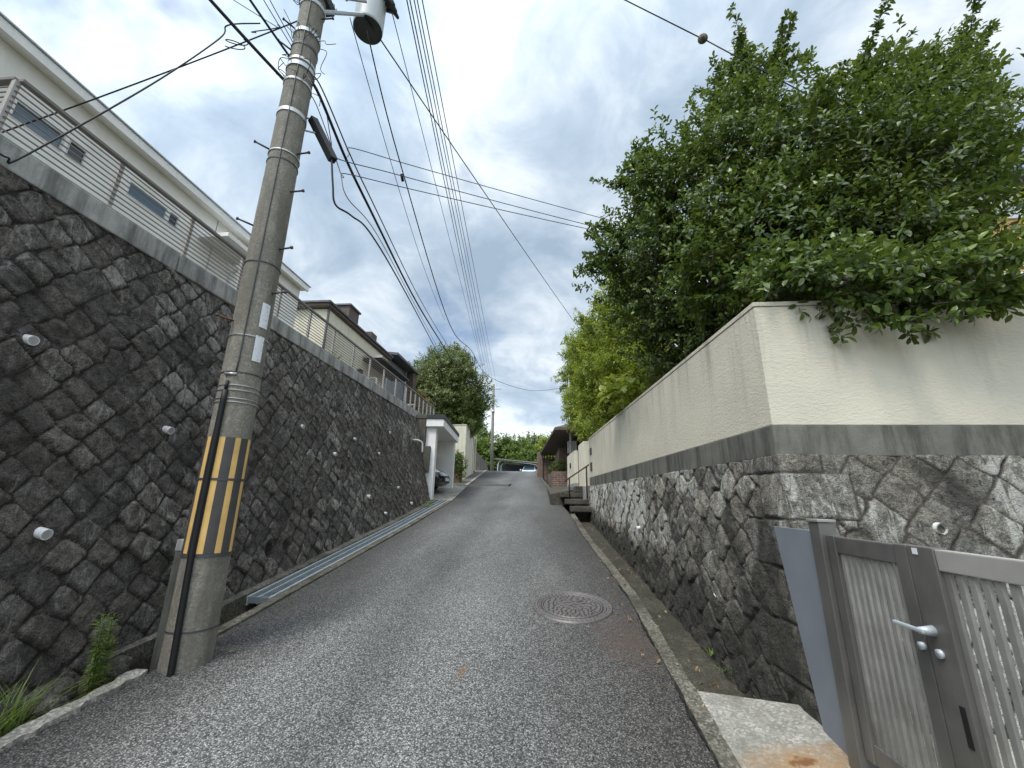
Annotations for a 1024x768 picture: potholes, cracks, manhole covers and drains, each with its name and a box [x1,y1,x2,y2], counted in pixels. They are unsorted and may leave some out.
drain grate [246,500,449,605]
manhole cover [533,591,612,624]
